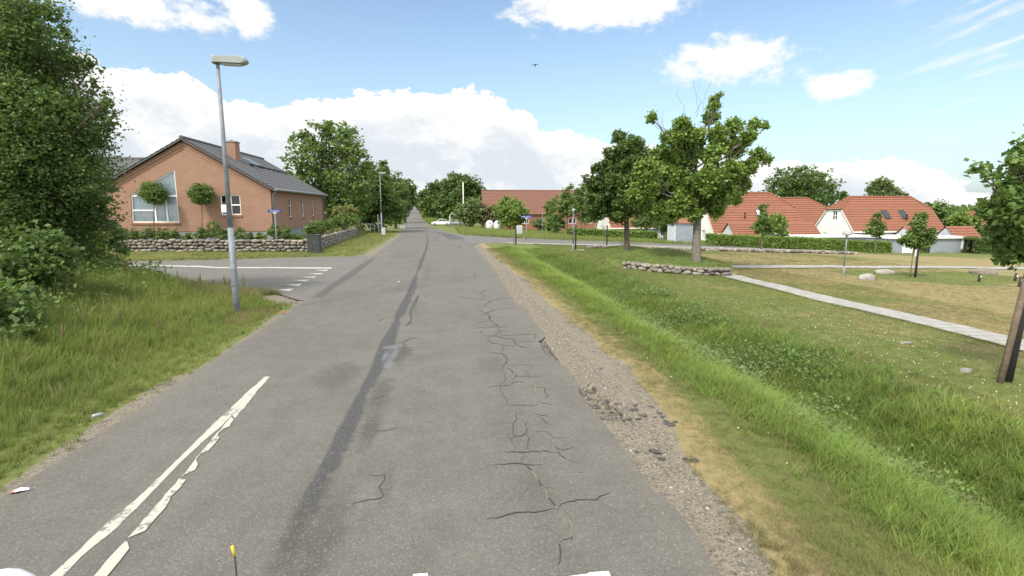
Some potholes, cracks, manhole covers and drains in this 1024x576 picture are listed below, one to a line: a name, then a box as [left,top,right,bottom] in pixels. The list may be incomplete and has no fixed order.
crack [463,290,609,565]
crack [398,283,427,351]
crack [350,475,393,508]
